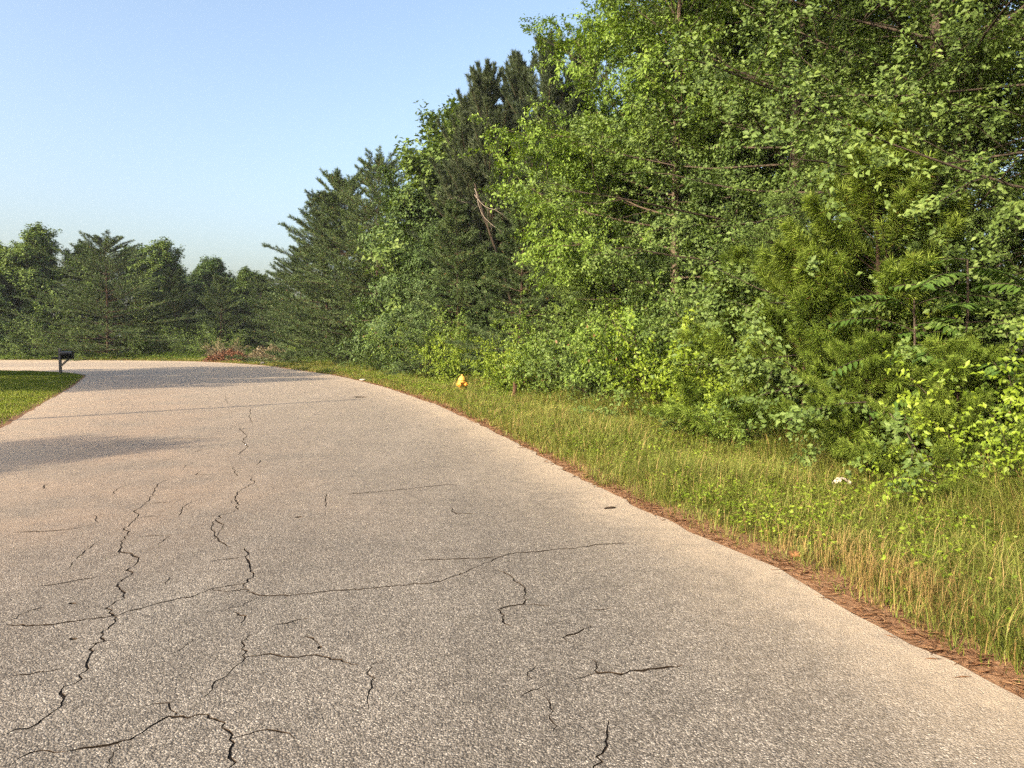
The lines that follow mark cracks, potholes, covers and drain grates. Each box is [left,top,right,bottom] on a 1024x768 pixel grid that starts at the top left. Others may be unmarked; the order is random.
crack [0,409,621,768]
crack [563,608,682,679]
